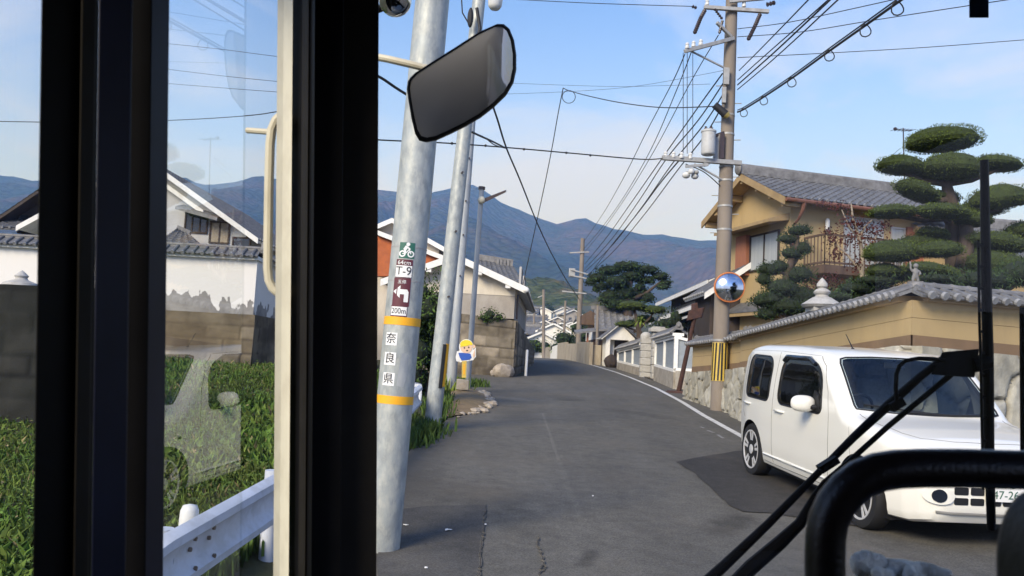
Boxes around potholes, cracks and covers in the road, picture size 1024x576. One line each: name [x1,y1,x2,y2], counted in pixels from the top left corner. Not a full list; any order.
crack [536,536,547,576]
